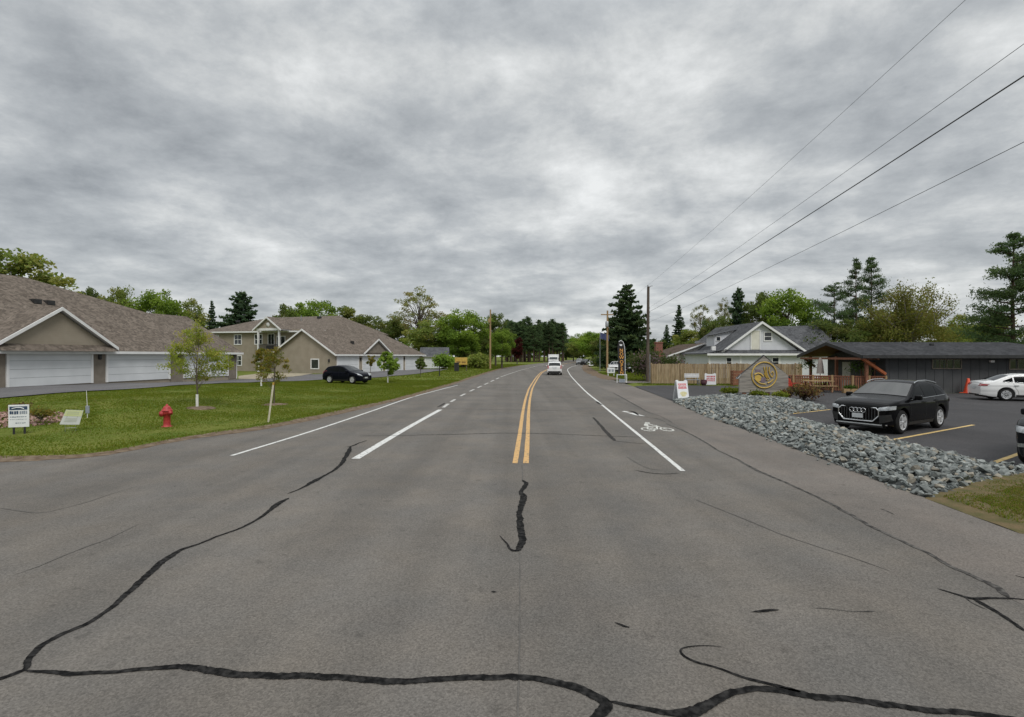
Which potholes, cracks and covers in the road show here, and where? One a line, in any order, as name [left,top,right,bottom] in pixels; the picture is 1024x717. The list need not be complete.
crack [940,575,1024,630]
crack [14,524,138,575]
crack [679,645,801,692]
